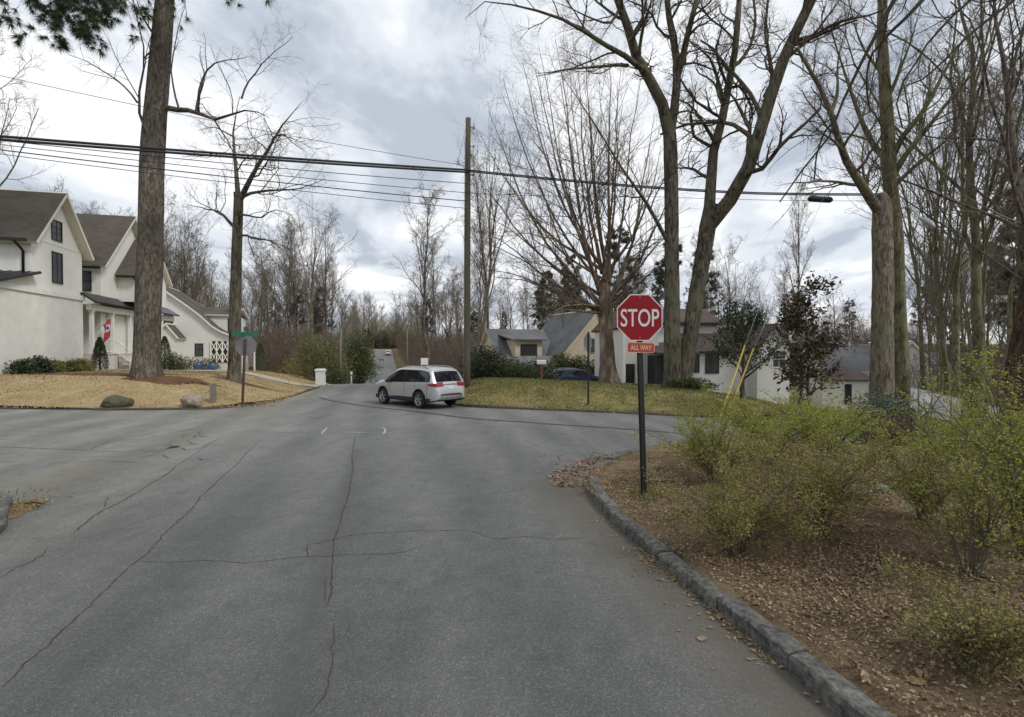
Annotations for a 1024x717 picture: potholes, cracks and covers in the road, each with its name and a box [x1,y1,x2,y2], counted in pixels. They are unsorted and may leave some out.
crack [14,421,214,532]
crack [2,441,582,687]
